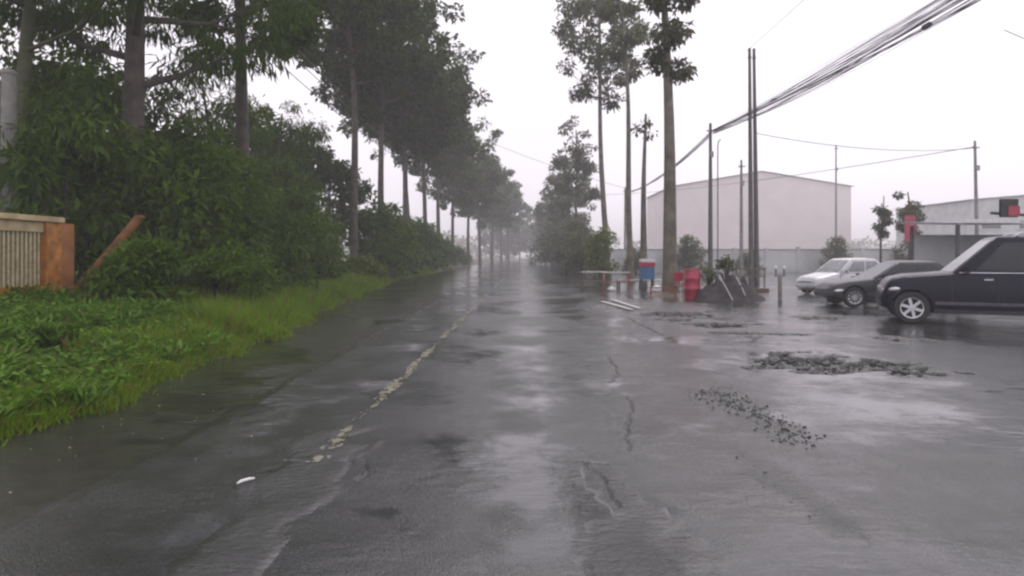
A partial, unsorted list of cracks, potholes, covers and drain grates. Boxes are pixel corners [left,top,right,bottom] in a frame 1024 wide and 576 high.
pothole [672,321,770,329]
pothole [629,311,750,323]
crack [561,355,674,512]
pothole [737,351,960,378]
crack [621,317,671,336]
